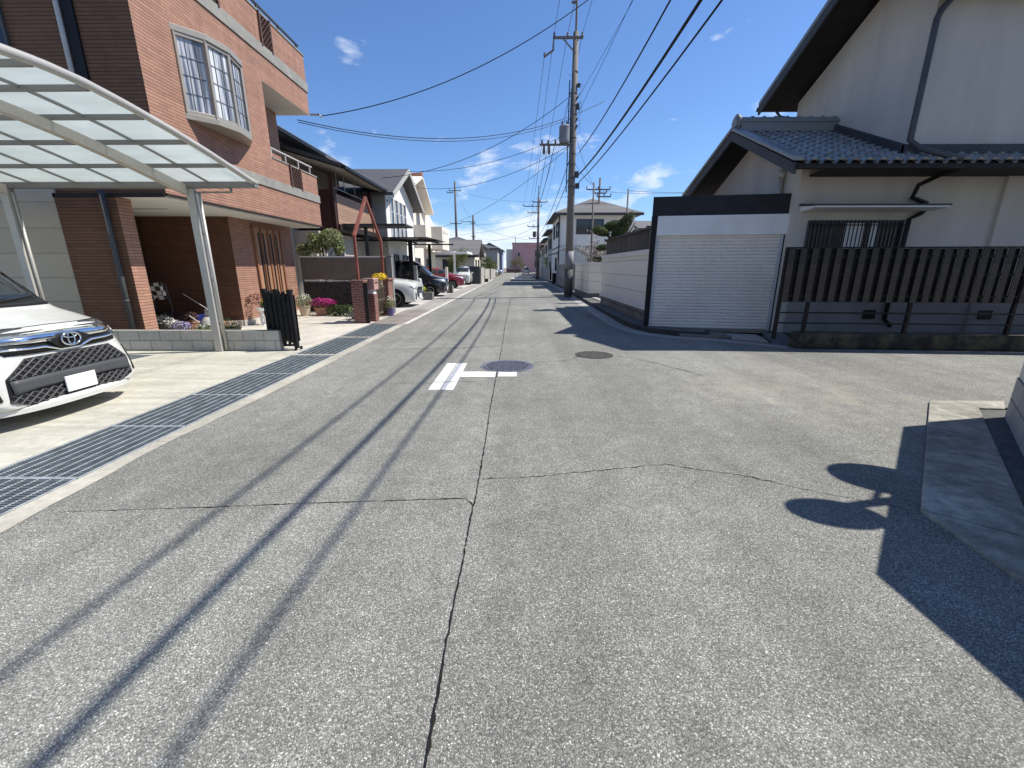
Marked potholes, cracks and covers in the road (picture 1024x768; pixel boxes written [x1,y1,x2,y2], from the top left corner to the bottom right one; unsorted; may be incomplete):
manhole cover [481,360,534,372]
drain grate [111,394,251,427]
manhole cover [575,351,613,359]
drain grate [245,355,332,374]
drain grate [0,426,186,479]
drain grate [0,478,77,517]
drain grate [339,324,398,337]
crack [486,464,912,510]
drain grate [296,338,369,354]
drain grate [191,373,295,395]
crack [62,498,473,512]
